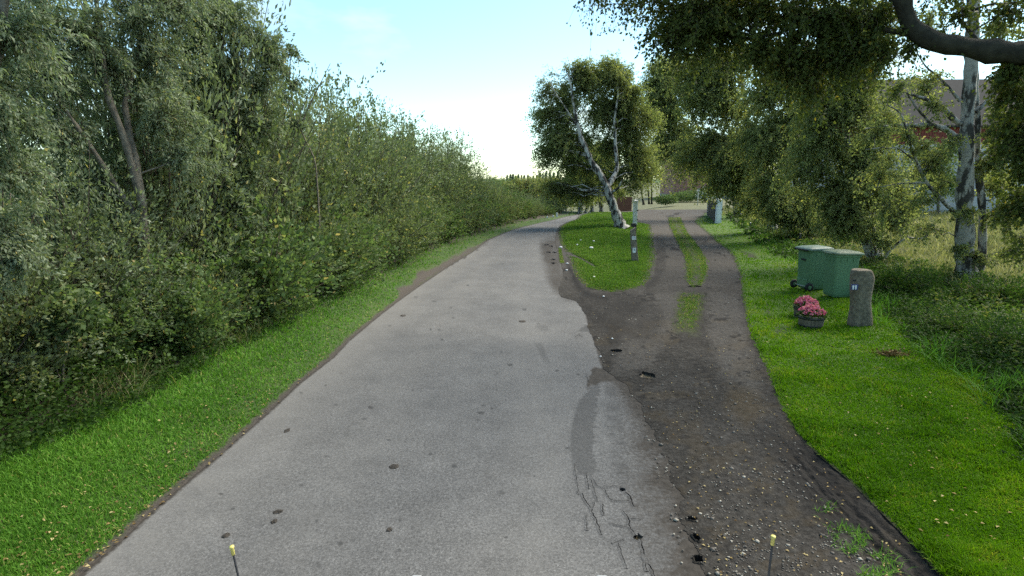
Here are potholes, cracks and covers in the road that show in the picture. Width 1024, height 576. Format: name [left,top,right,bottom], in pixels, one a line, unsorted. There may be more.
pothole [692,554,706,565]
pothole [635,370,659,380]
crack [572,463,657,576]
